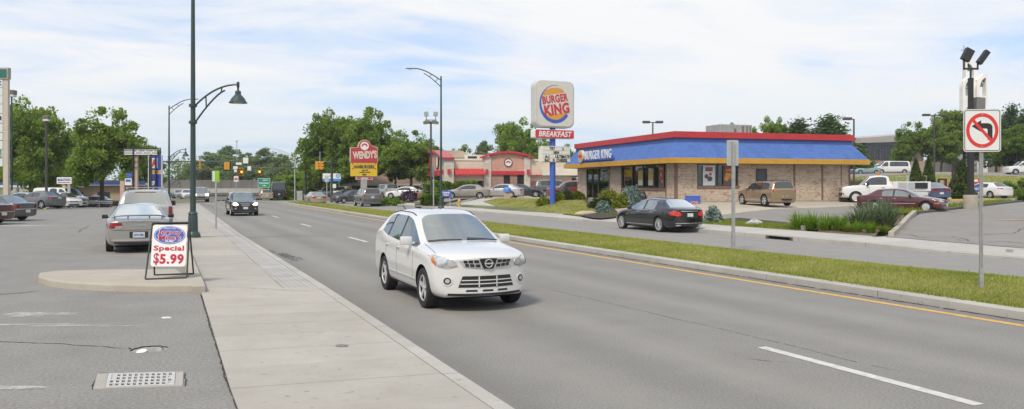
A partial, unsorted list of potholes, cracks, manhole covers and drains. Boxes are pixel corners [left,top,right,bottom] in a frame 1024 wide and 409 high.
drain grate [93,371,184,390]
